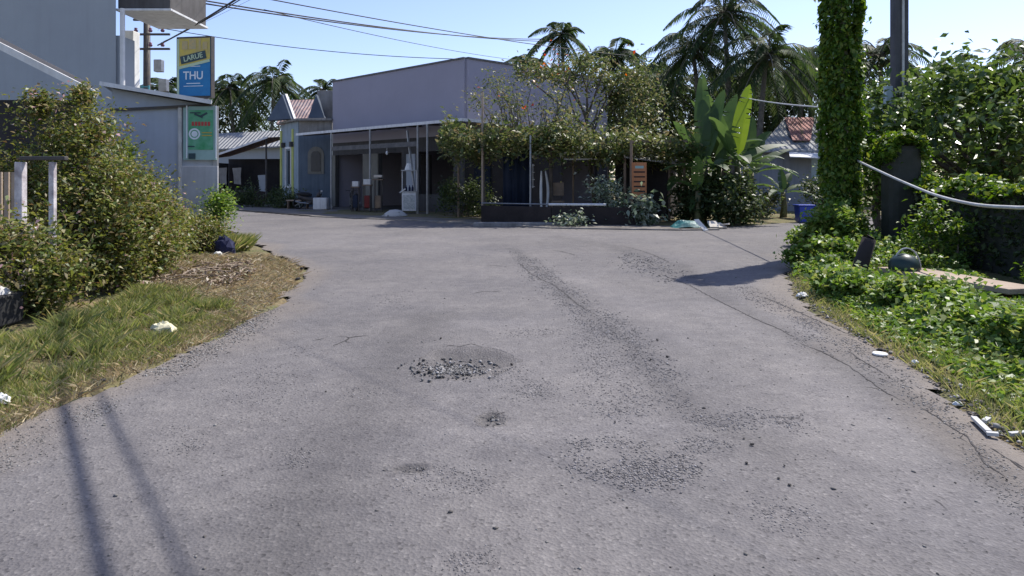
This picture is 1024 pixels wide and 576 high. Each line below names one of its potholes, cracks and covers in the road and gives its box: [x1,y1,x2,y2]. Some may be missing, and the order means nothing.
pothole [474,408,508,428]
pothole [384,463,434,475]
crack [922,406,1024,477]
pothole [398,347,523,382]
